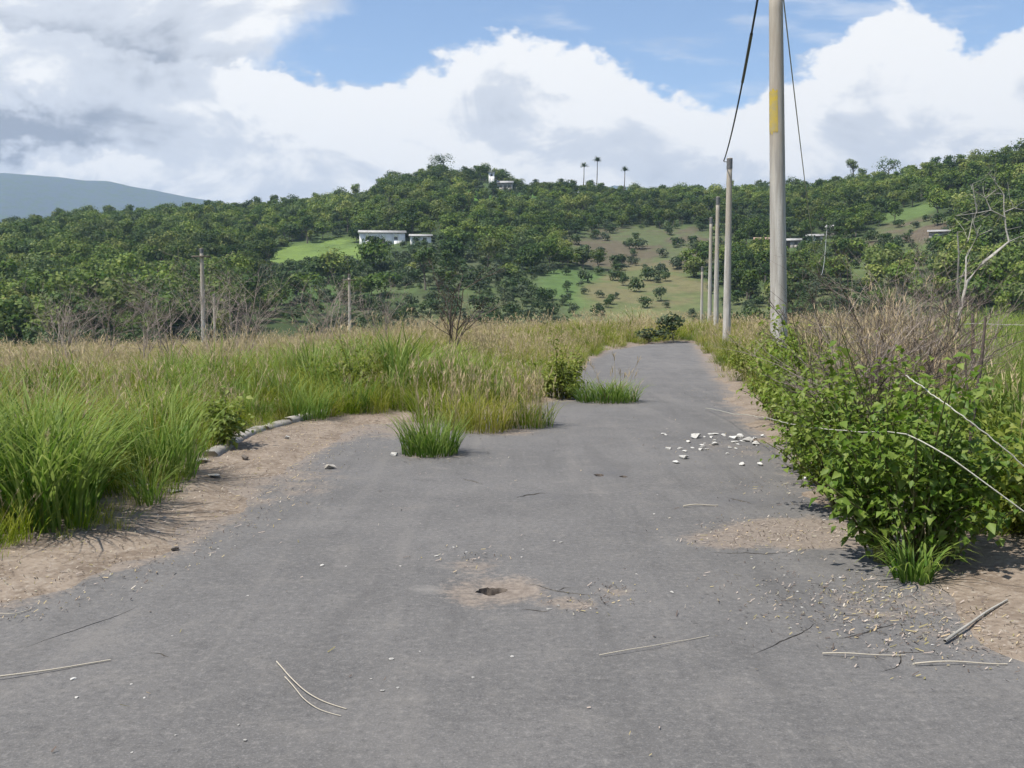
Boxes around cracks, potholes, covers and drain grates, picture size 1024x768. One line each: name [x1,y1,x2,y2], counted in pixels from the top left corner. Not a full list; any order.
crack [751,623,815,655]
crack [33,608,134,645]
crack [531,584,586,595]
pothole [475,587,508,596]
